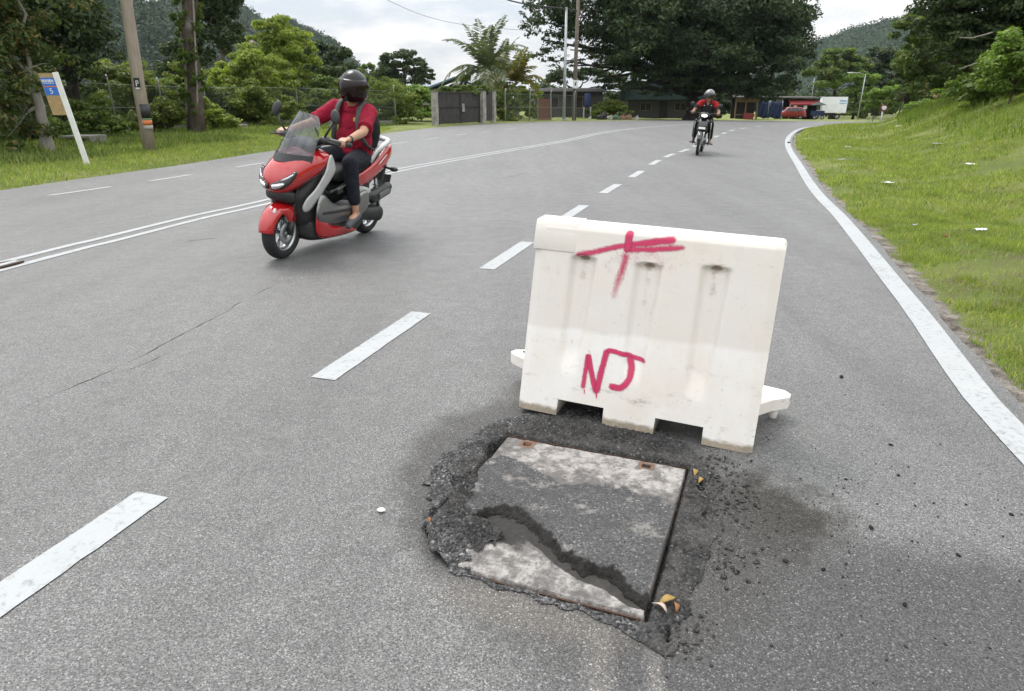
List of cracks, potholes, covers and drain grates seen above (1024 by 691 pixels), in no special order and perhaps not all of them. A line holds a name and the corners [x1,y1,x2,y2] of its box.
manhole cover [428,435,687,622]
